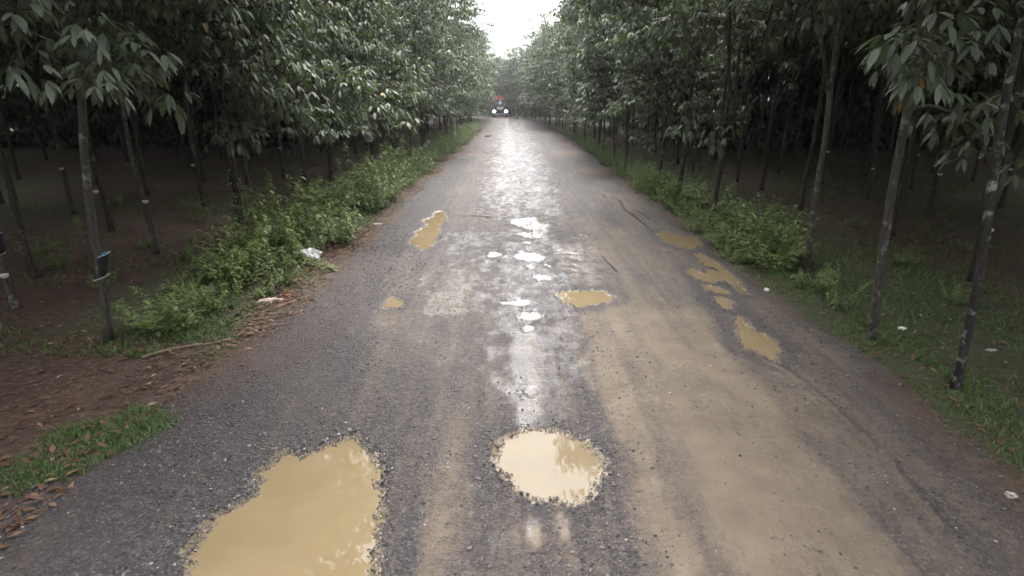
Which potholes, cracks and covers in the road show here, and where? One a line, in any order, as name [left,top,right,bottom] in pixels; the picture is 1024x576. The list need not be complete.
pothole [723,312,790,366]
pothole [674,250,759,298]
pothole [401,209,454,252]
pothole [547,287,624,310]
pothole [705,293,742,312]
pothole [647,229,712,252]
pothole [164,426,400,576]
crack [595,193,661,232]
pothole [374,293,412,311]
pothole [480,421,620,515]
